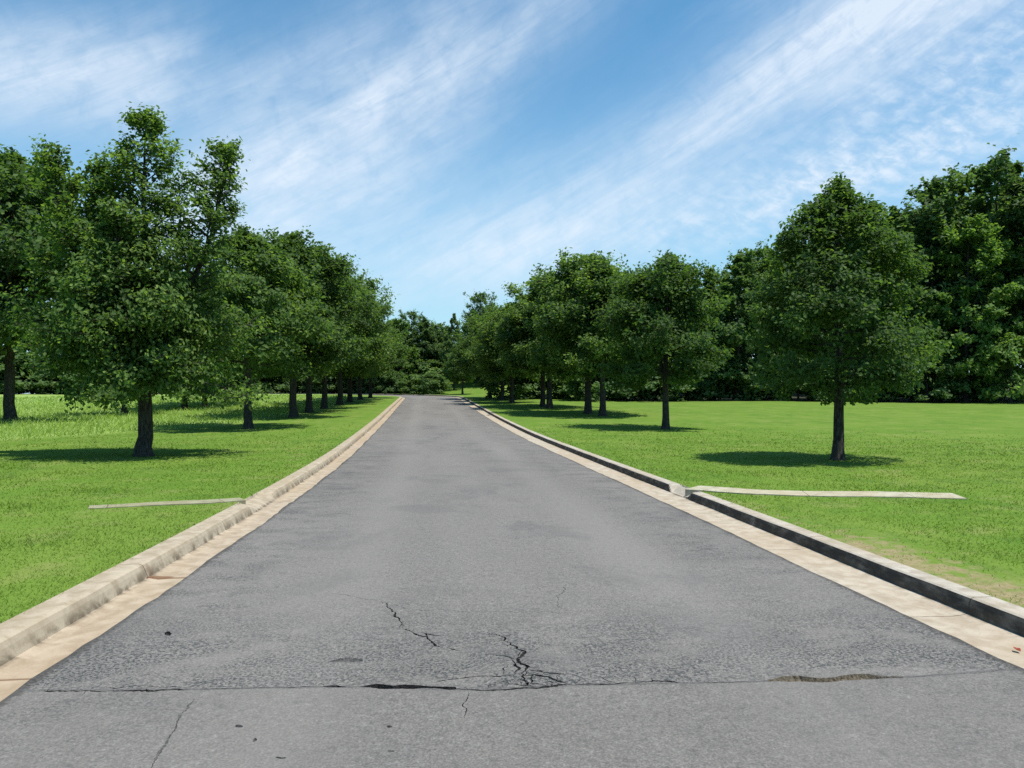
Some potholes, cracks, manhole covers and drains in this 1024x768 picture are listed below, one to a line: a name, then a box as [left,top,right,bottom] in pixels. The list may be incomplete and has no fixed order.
crack [333,587,588,651]
crack [41,684,351,768]
pothole [767,674,903,682]
